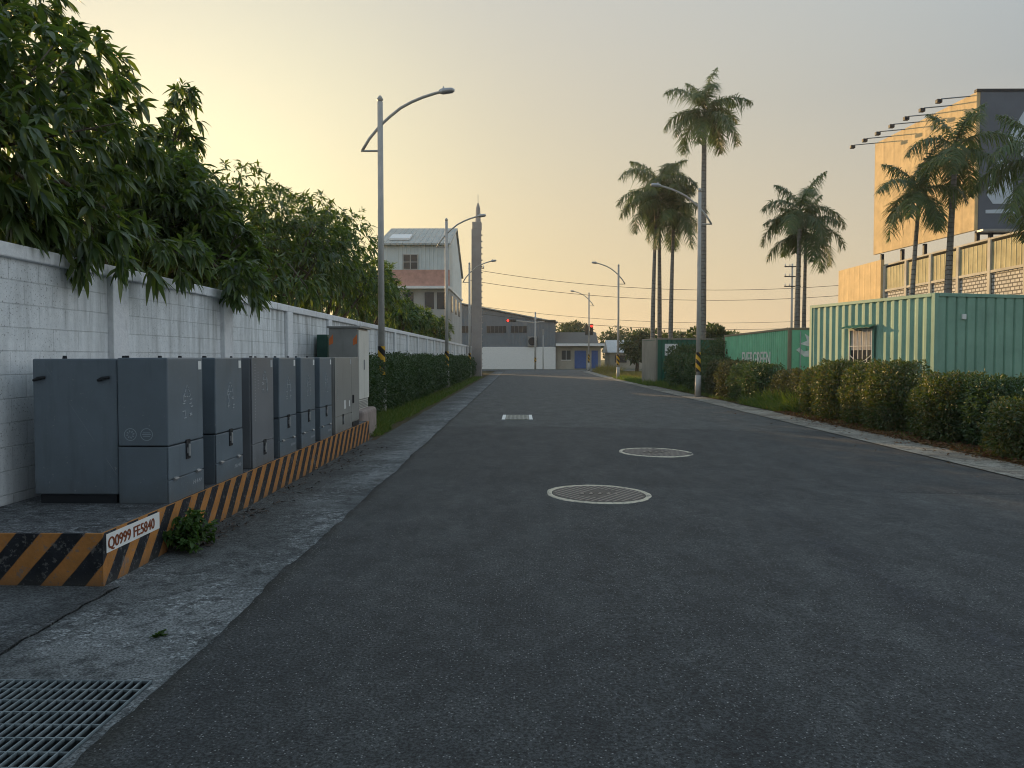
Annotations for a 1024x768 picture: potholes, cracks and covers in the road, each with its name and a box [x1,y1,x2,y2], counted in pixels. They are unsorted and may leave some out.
drain grate [0,679,152,768]
manhole cover [619,448,693,457]
manhole cover [547,485,652,504]
